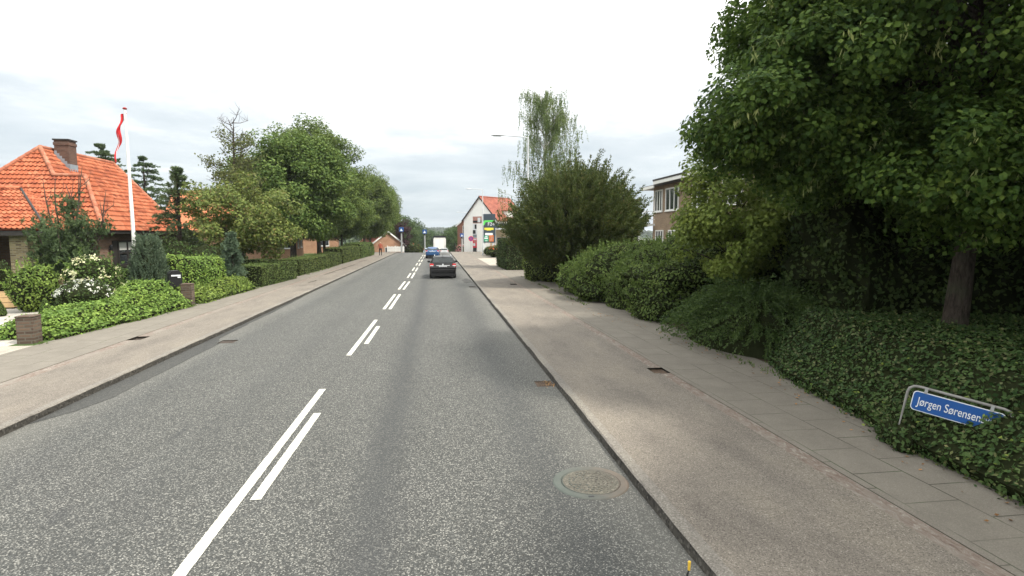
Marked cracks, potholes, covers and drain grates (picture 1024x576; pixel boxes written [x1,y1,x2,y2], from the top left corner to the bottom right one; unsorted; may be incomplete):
manhole cover [553,467,629,500]
